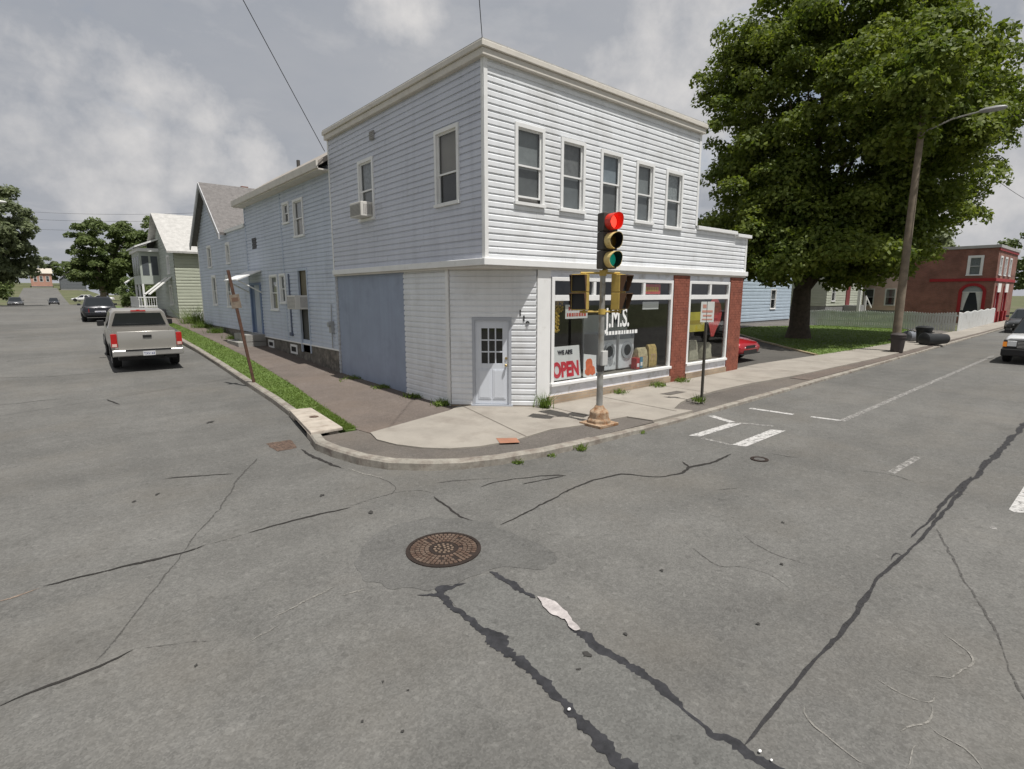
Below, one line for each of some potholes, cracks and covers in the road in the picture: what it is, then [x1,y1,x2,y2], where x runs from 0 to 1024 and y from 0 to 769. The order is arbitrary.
crack [937,530,1024,698]
crack [803,710,869,765]
crack [879,632,983,769]
manhole cover [406,532,481,568]
crack [693,536,805,588]
crack [0,449,735,706]
